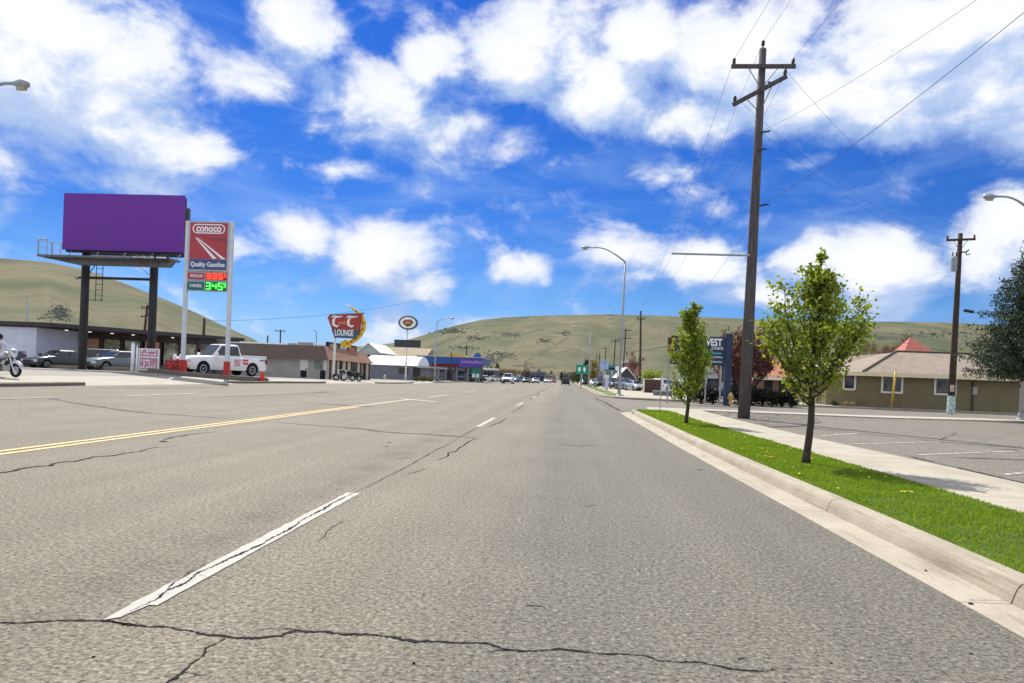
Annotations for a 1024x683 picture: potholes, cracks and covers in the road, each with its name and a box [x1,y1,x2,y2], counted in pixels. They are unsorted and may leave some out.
crack [0,431,216,473]
crack [0,492,798,683]
